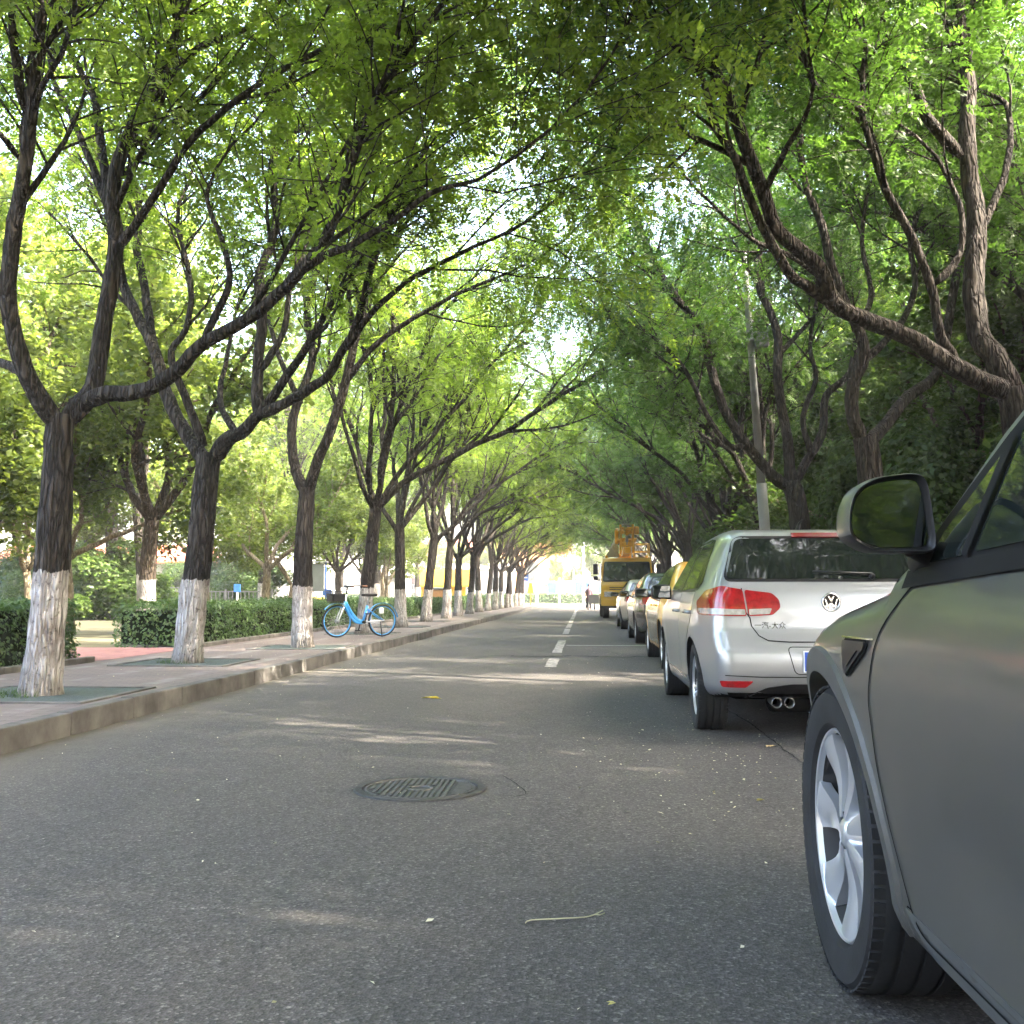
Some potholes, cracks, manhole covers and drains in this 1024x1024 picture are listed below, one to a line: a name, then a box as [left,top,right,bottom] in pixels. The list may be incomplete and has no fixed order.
crack [729,711,803,763]
manhole cover [353,776,487,802]
